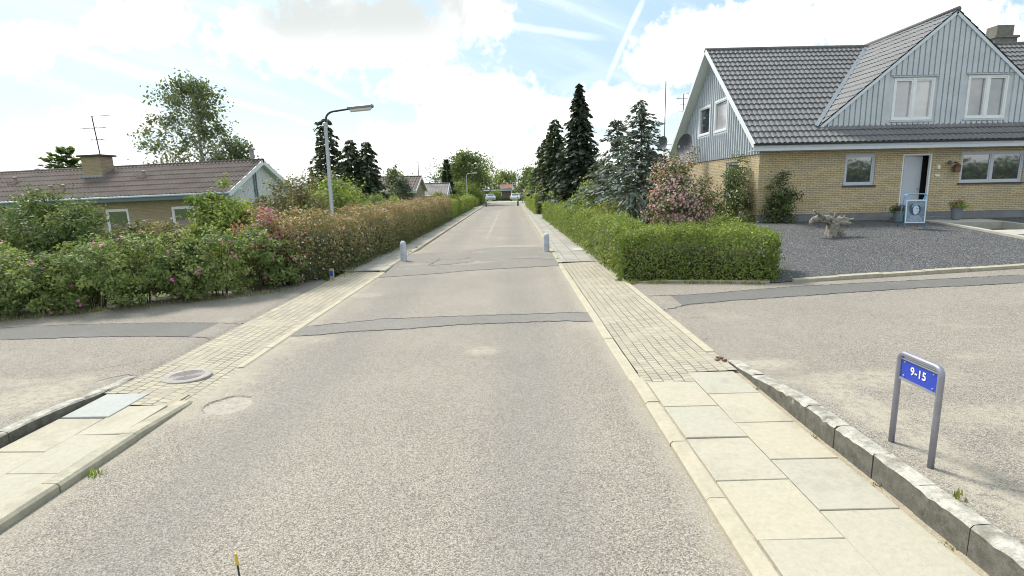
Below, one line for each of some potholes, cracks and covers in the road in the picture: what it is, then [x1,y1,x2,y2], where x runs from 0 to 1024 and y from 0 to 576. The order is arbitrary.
manhole cover [161,368,212,384]
